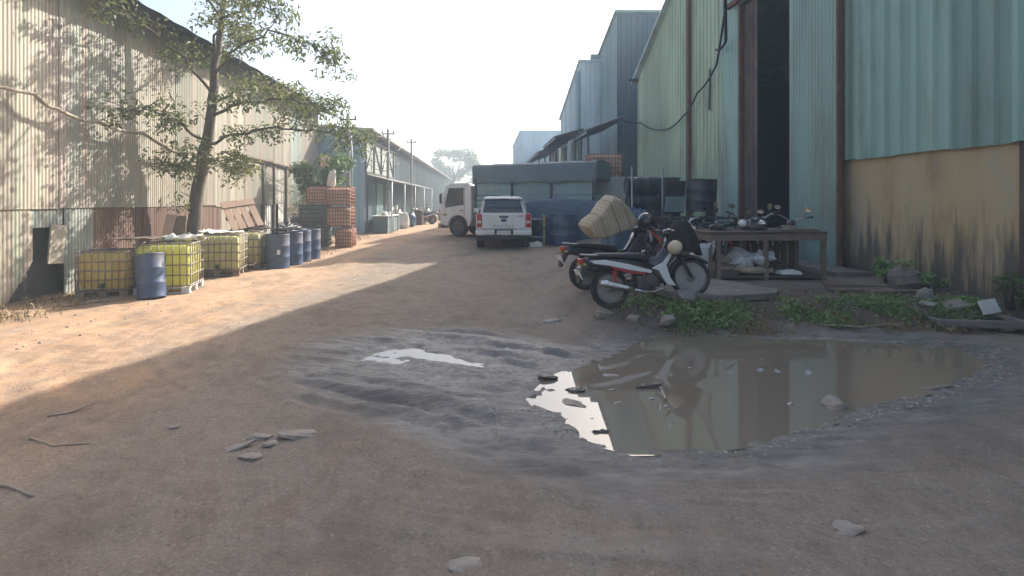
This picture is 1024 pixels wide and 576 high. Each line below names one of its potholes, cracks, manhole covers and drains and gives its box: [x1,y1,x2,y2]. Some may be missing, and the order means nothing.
pothole [356,343,491,367]
pothole [530,334,990,453]
